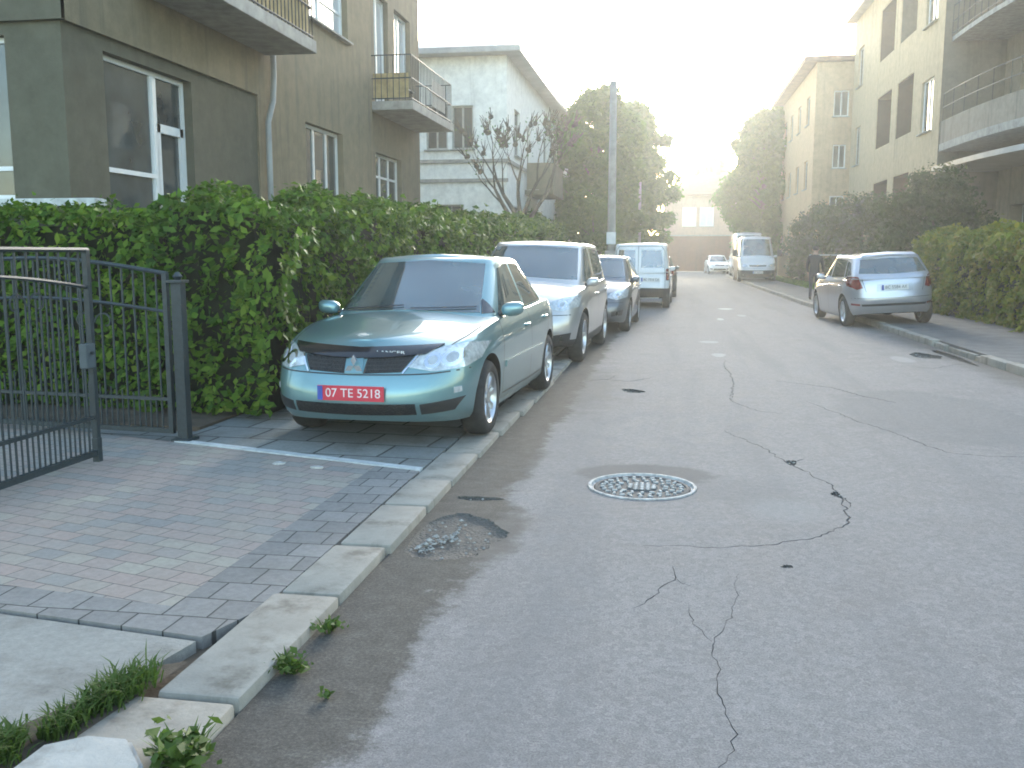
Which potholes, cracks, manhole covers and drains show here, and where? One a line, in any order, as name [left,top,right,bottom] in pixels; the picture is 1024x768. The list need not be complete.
pothole [404,513,509,561]
crack [689,576,739,768]
crack [782,381,1019,457]
manhole cover [588,473,697,501]
crack [645,434,851,548]
crack [634,566,687,608]
